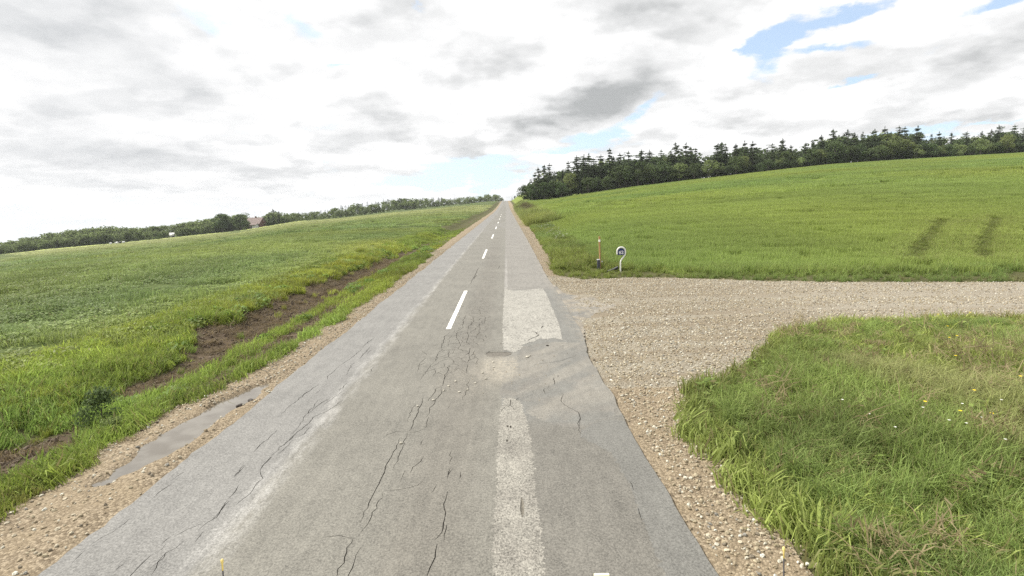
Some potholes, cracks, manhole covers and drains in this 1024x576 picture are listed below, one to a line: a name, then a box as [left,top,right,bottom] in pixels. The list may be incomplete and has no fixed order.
crack [328,307,491,576]
crack [124,341,372,574]
